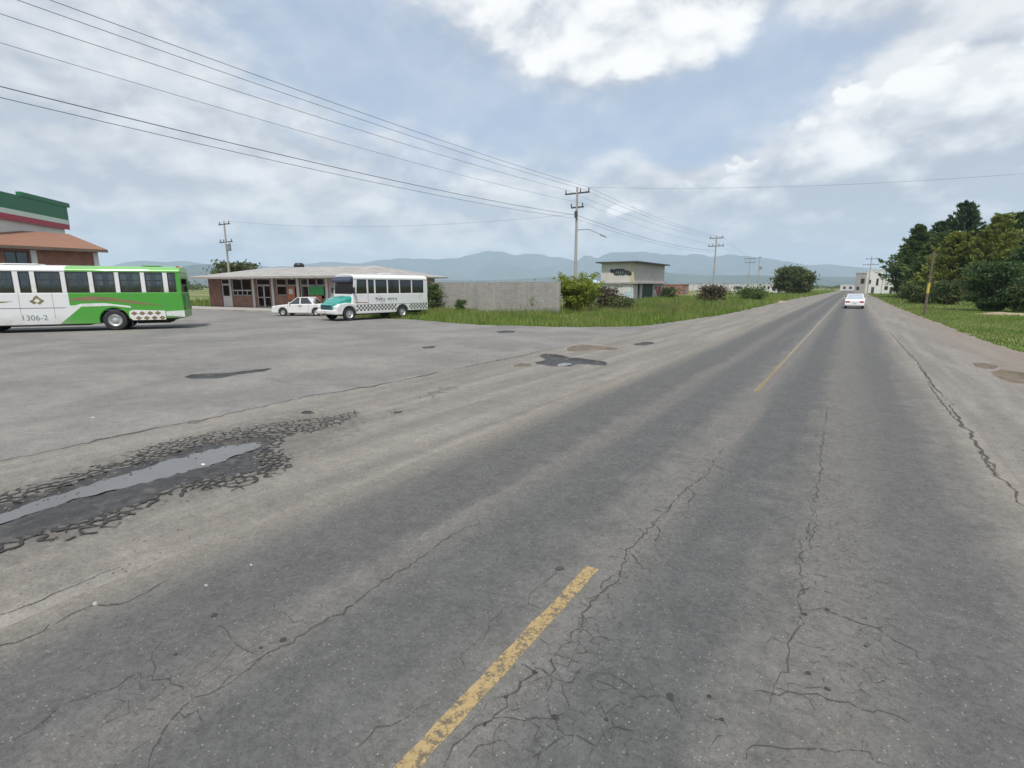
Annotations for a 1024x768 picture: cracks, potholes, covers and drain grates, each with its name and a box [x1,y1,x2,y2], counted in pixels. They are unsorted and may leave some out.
pothole [0,436,273,543]
crack [890,333,1024,506]
crack [443,450,728,768]
crack [755,410,923,726]
crack [746,738,888,765]
crack [0,350,542,552]
crack [14,524,476,767]
